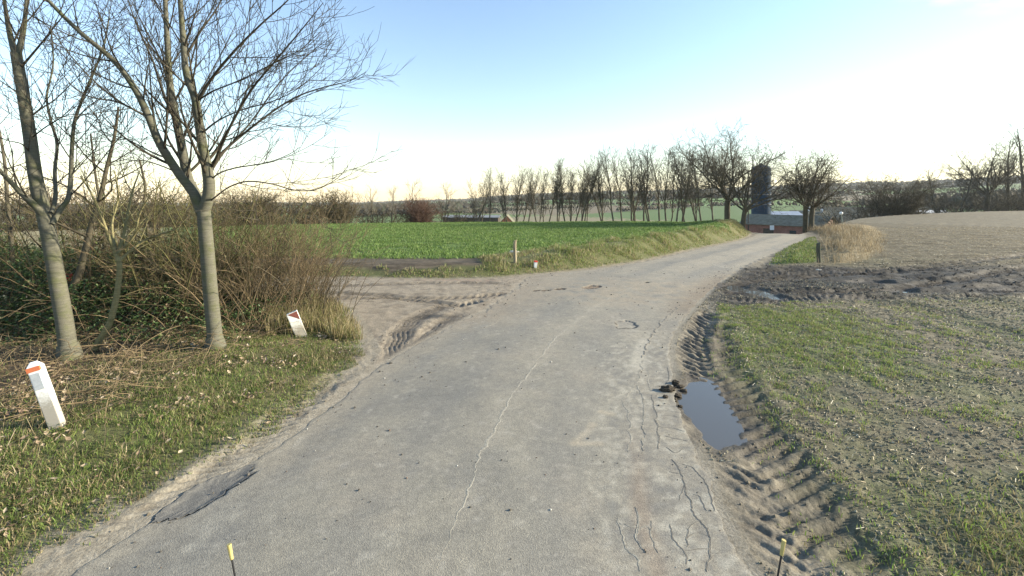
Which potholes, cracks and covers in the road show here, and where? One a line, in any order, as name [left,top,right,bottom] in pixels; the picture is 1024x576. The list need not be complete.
crack [617,307,720,572]
